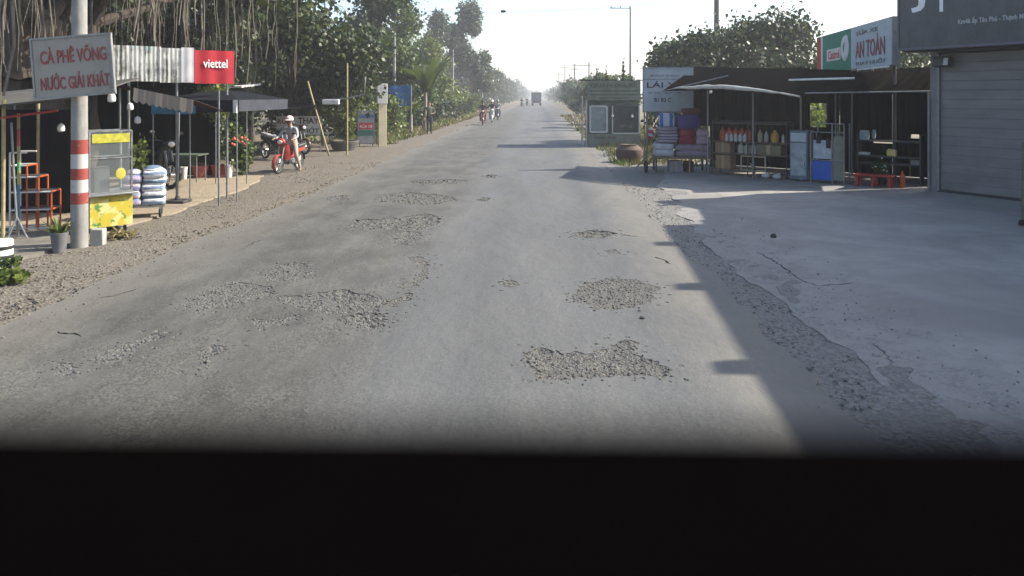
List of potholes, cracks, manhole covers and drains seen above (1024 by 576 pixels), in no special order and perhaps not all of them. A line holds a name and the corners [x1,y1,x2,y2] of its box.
crack [757,252,850,286]
pothole [231,312,309,334]
pothole [563,228,625,241]
pothole [511,334,689,386]
pothole [249,261,316,284]
pothole [340,213,451,231]
pothole [33,359,90,380]
pothole [374,191,457,206]
pothole [562,276,672,313]
pothole [320,309,408,335]
pothole [167,279,292,316]
